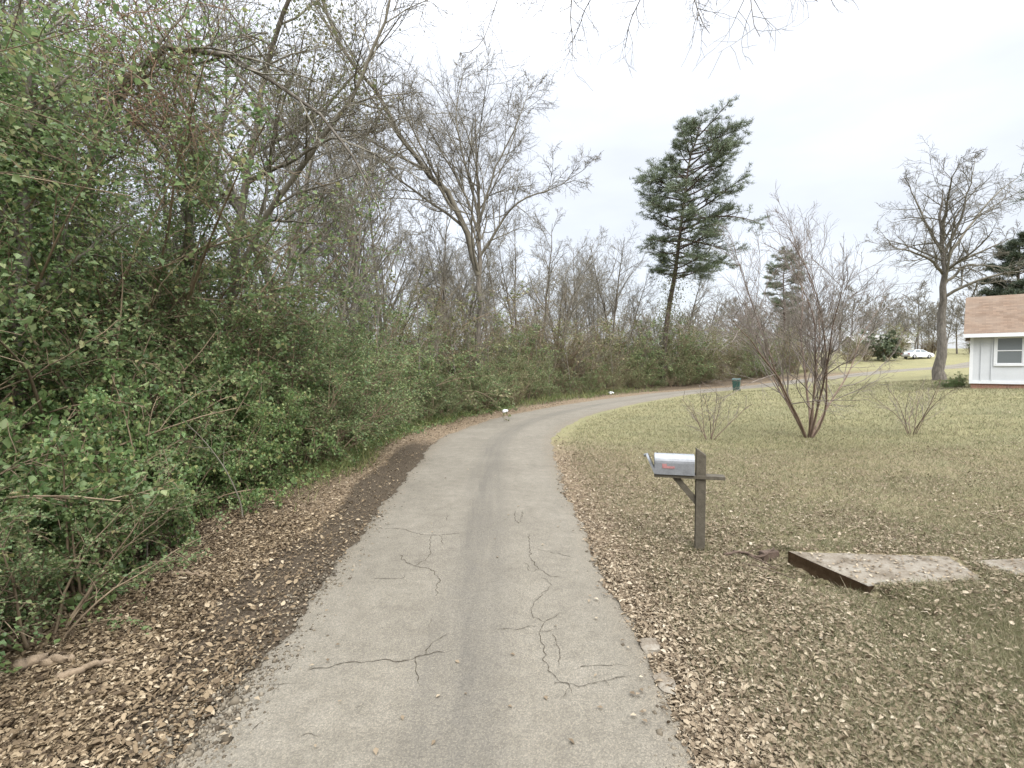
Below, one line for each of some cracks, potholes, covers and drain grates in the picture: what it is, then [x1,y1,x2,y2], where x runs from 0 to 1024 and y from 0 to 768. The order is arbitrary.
crack [371,516,455,595]
crack [312,635,445,686]
crack [503,536,629,697]
